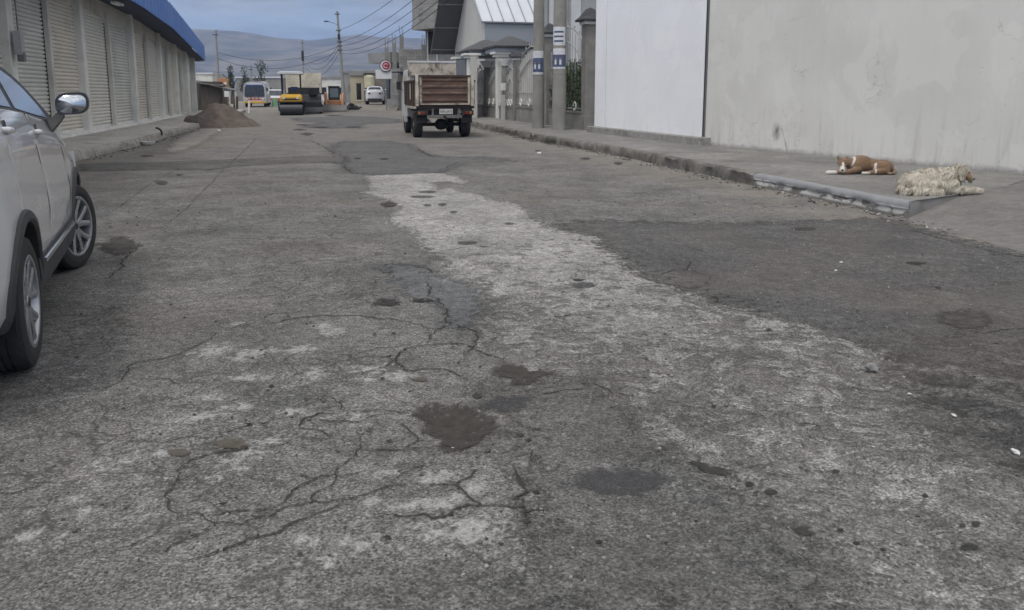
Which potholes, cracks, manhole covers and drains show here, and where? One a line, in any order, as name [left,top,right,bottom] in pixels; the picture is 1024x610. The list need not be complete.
pothole [492,364,553,385]
crack [67,248,544,561]
pothole [412,402,498,452]
